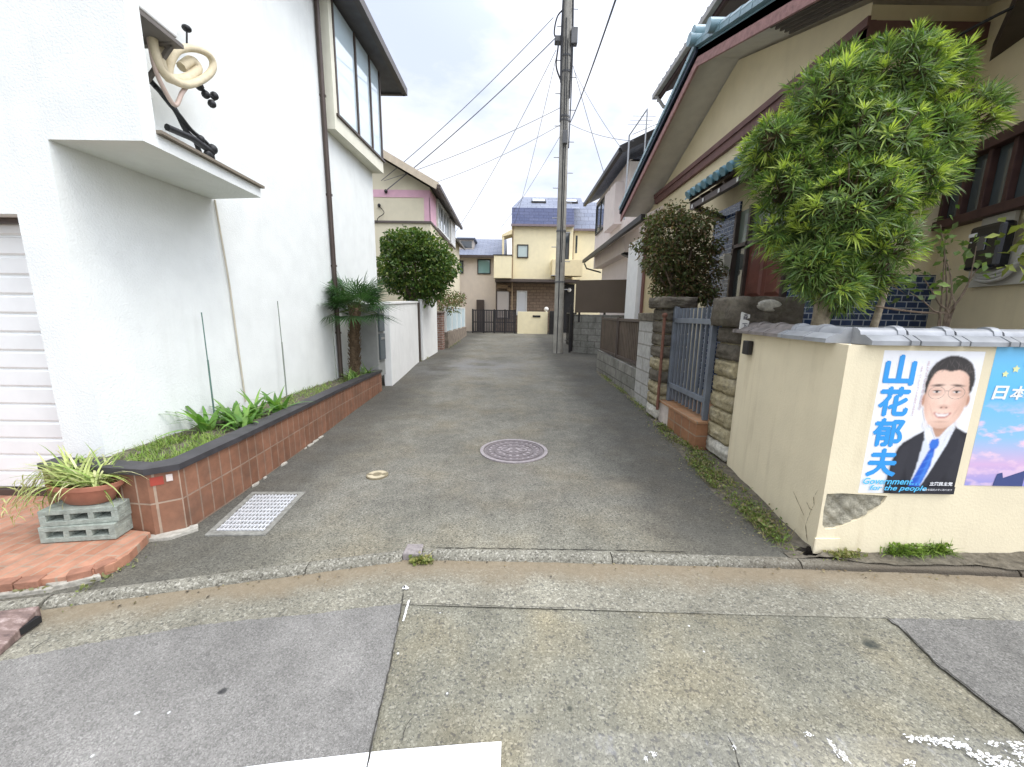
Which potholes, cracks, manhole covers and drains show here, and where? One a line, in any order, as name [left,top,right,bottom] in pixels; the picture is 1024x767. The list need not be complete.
manhole cover [480,439,548,464]
manhole cover [366,470,388,480]
drain grate [205,492,306,536]
